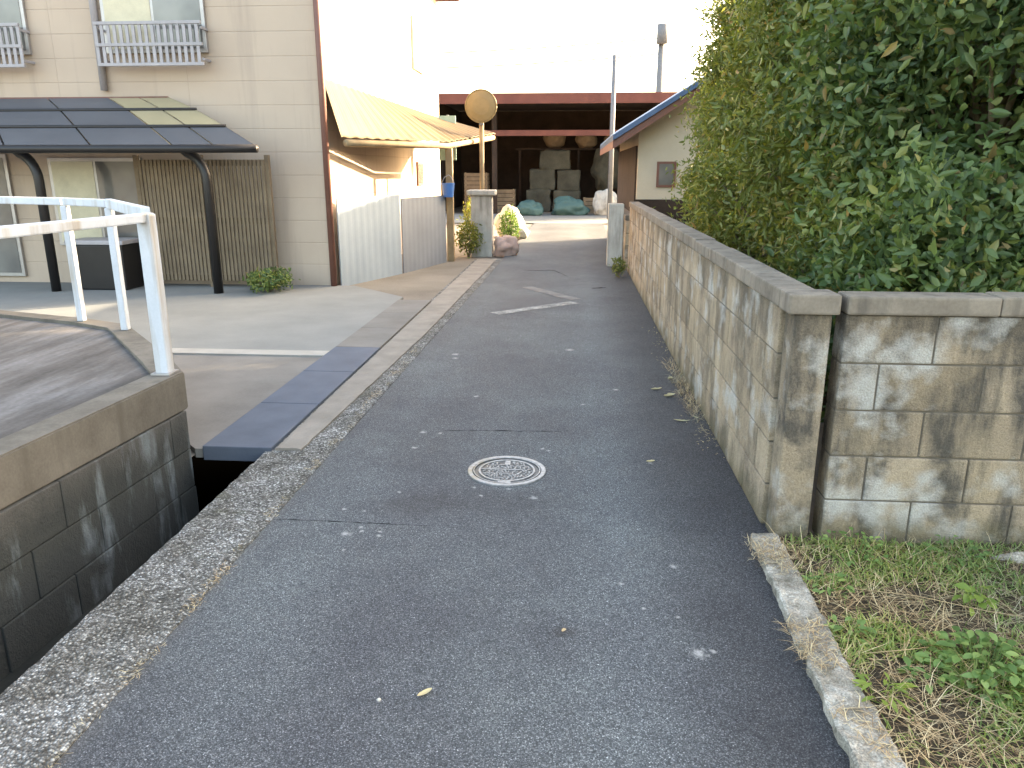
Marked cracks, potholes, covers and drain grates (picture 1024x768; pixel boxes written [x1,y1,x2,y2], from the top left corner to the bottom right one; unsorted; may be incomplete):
manhole cover [468,456,546,487]
